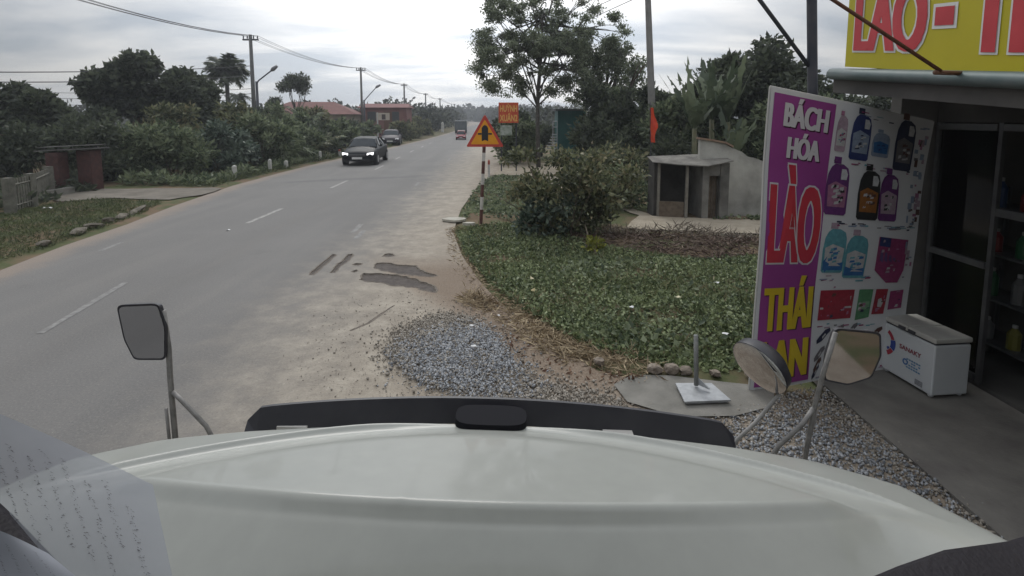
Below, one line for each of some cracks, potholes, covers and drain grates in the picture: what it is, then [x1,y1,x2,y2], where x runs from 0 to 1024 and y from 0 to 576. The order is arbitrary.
pothole [373,262,438,277]
pothole [359,273,438,293]
crack [350,305,395,331]
